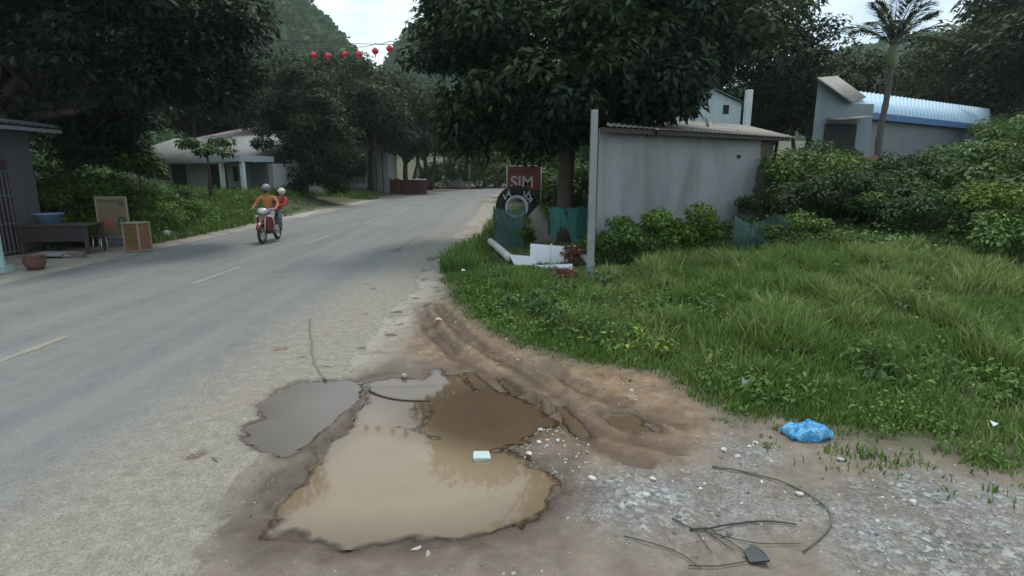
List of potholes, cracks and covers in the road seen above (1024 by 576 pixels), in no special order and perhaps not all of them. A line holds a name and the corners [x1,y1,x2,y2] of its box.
pothole [262,370,572,554]
pothole [243,380,369,458]
crack [298,318,331,380]
